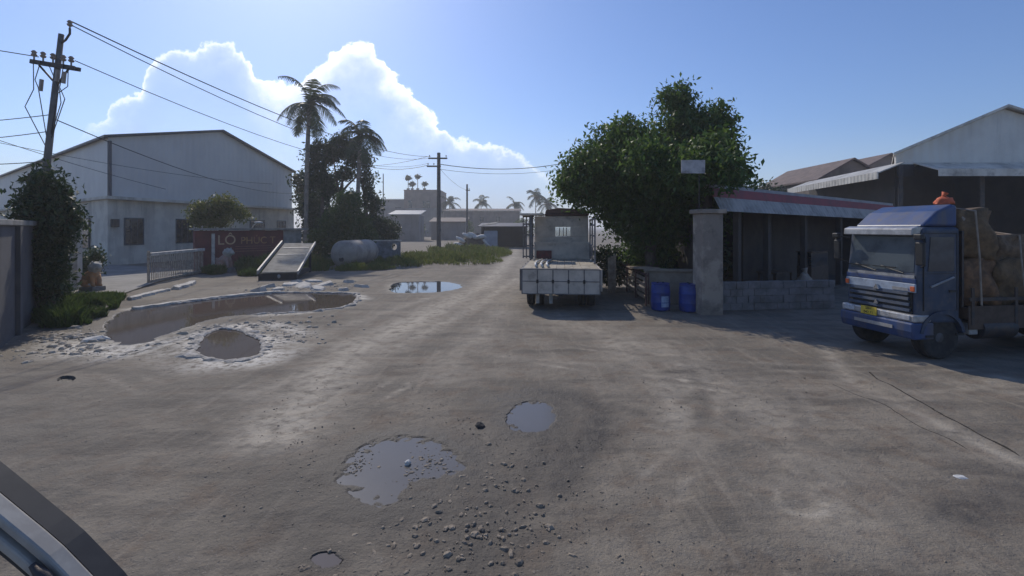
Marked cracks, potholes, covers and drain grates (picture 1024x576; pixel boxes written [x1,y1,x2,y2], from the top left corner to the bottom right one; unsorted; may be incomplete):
pothole [388,281,464,293]
pothole [308,551,344,568]
pothole [330,434,469,509]
crack [835,371,1019,456]
pothole [102,291,362,345]
pothole [505,400,558,434]
pothole [174,326,274,363]
